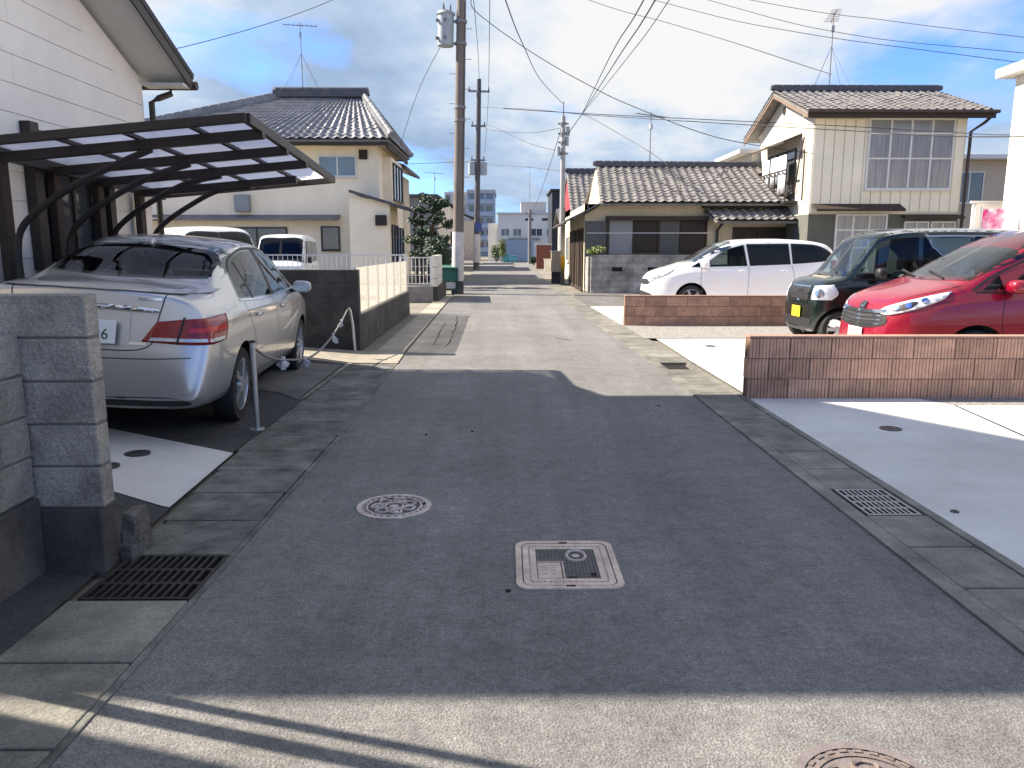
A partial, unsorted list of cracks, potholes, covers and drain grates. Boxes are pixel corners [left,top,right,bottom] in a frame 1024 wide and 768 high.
manhole cover [792,742,927,768]
crack [433,315,478,347]
manhole cover [356,494,432,520]
drain grate [833,489,922,516]
drain grate [77,555,229,602]
manhole cover [515,541,625,590]
